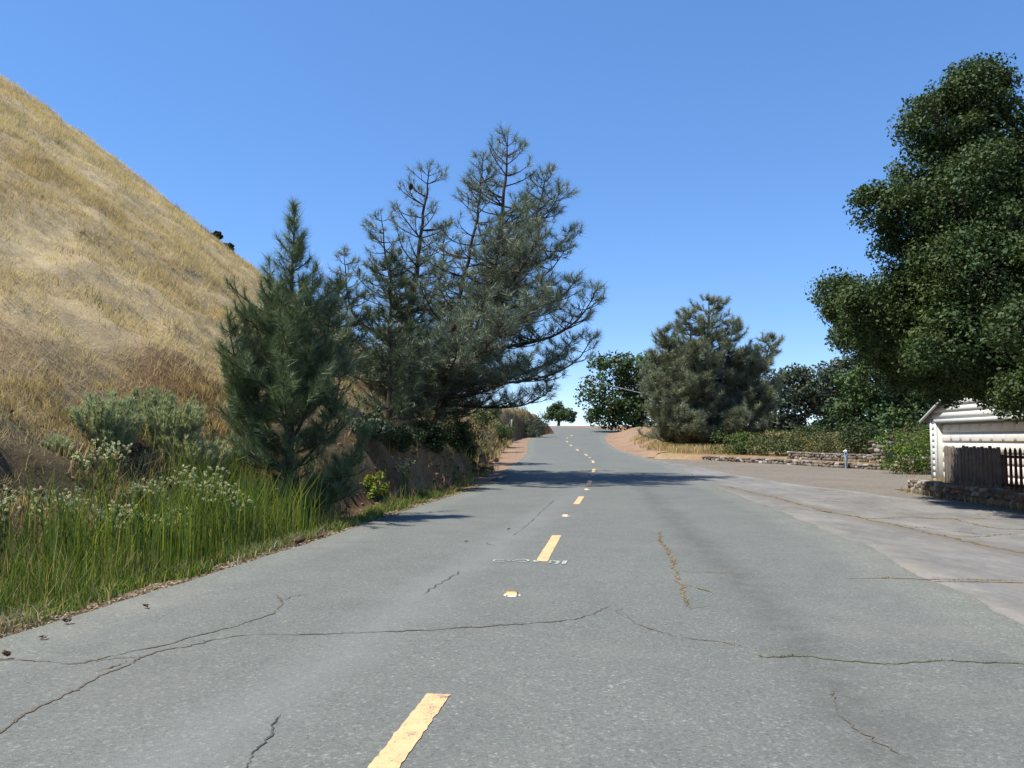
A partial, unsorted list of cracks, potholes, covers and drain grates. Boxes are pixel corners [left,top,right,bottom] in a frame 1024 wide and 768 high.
crack [830,690,898,753]
crack [759,653,1024,664]
crack [616,608,746,647]
crack [657,531,755,608]
crack [0,594,609,733]
crack [246,715,280,768]
